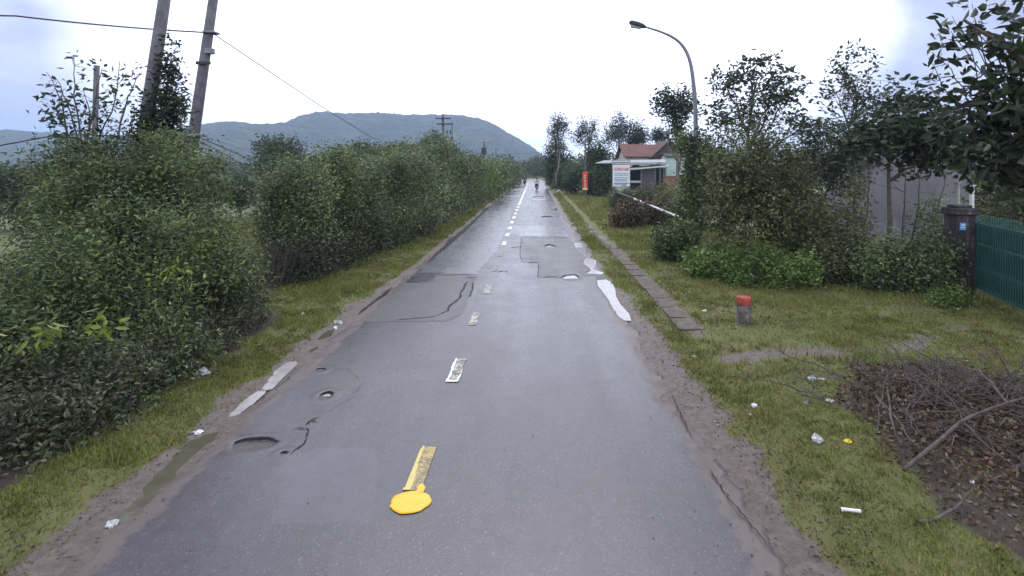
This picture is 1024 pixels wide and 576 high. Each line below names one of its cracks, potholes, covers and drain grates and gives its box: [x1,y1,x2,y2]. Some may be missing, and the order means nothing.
pothole [308,387,343,404]
crack [359,205,569,320]
crack [672,394,693,438]
pothole [304,365,334,375]
pothole [556,274,584,282]
crack [708,468,770,548]
crack [293,368,363,452]
pothole [216,432,291,458]
